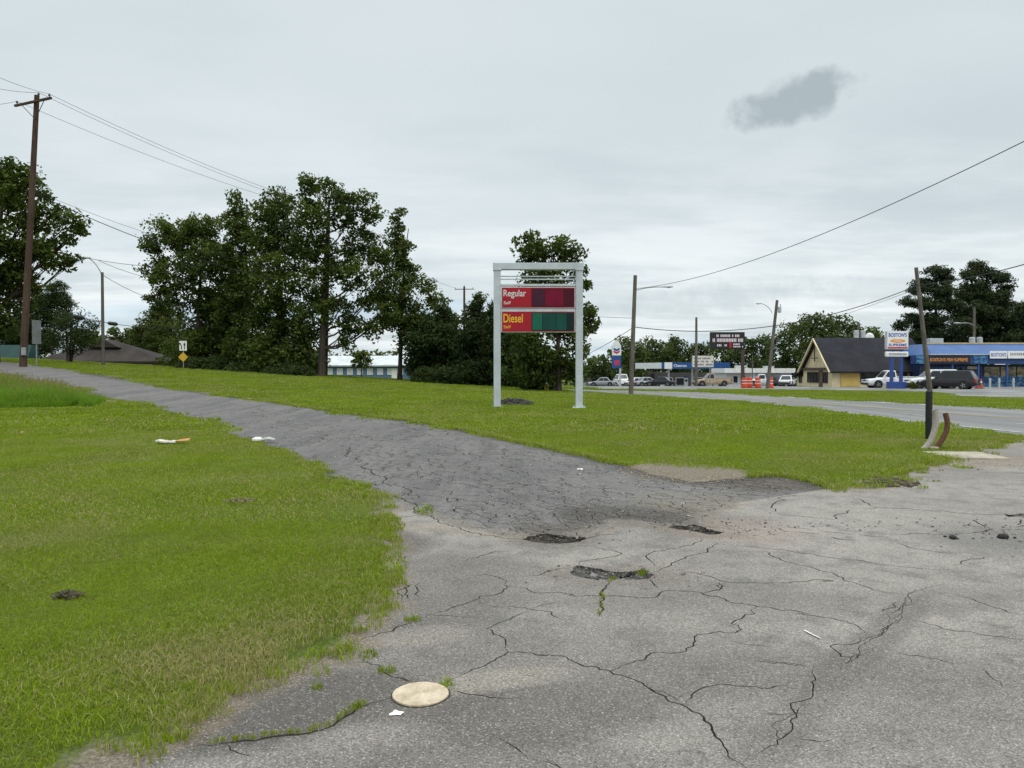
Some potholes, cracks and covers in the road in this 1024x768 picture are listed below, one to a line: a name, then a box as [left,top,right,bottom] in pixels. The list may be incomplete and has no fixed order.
crack [191,698,389,757]
manhole cover [391,682,450,708]
pothole [523,534,586,544]
crack [237,408,1024,768]
pothole [668,525,723,535]
pothole [570,565,654,580]
